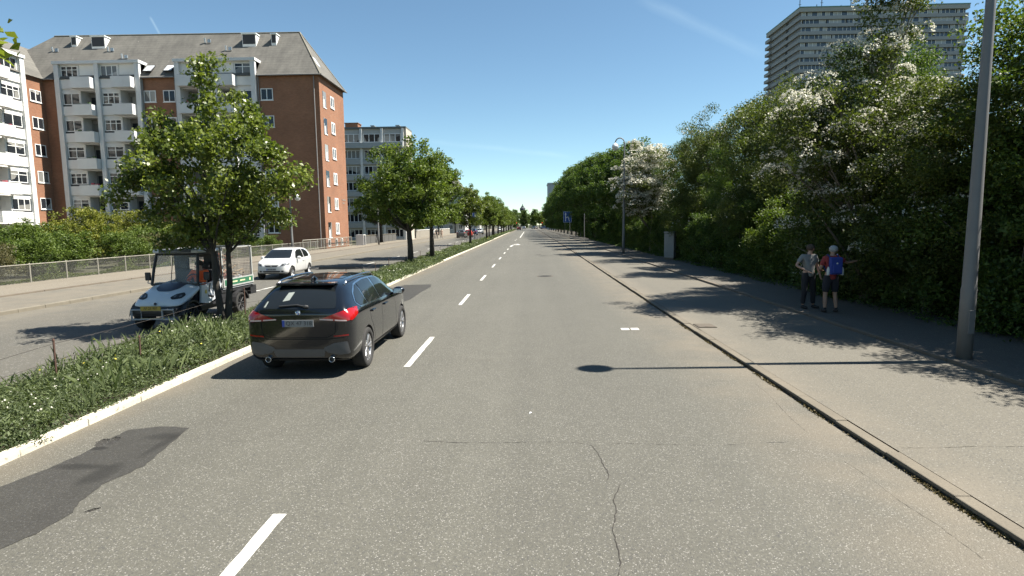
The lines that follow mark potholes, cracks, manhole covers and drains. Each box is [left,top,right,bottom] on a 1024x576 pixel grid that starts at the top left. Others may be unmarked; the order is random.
crack [436,441,775,576]
